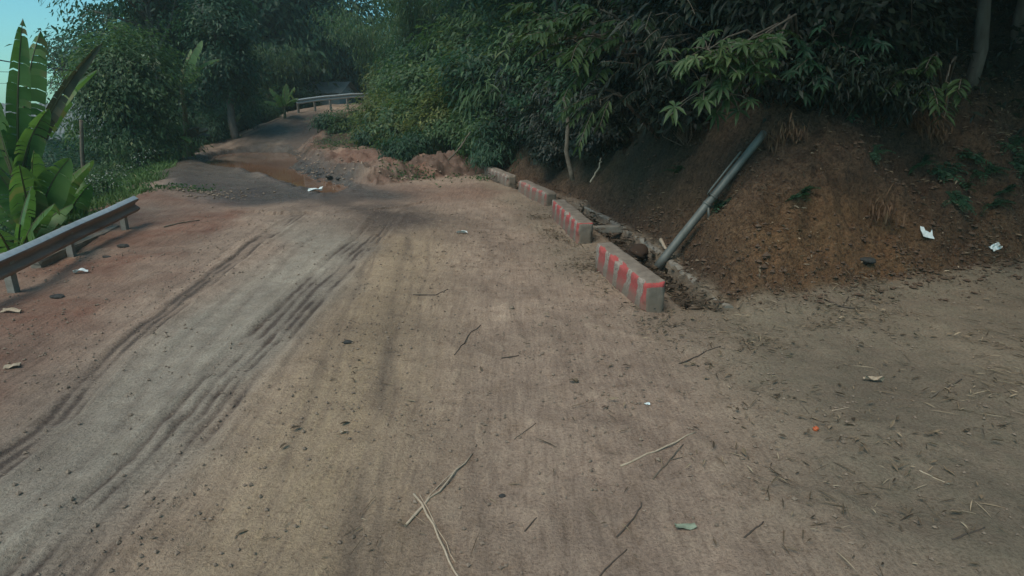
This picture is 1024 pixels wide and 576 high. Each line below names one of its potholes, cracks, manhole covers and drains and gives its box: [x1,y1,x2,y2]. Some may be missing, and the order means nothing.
pothole [194,143,357,194]
